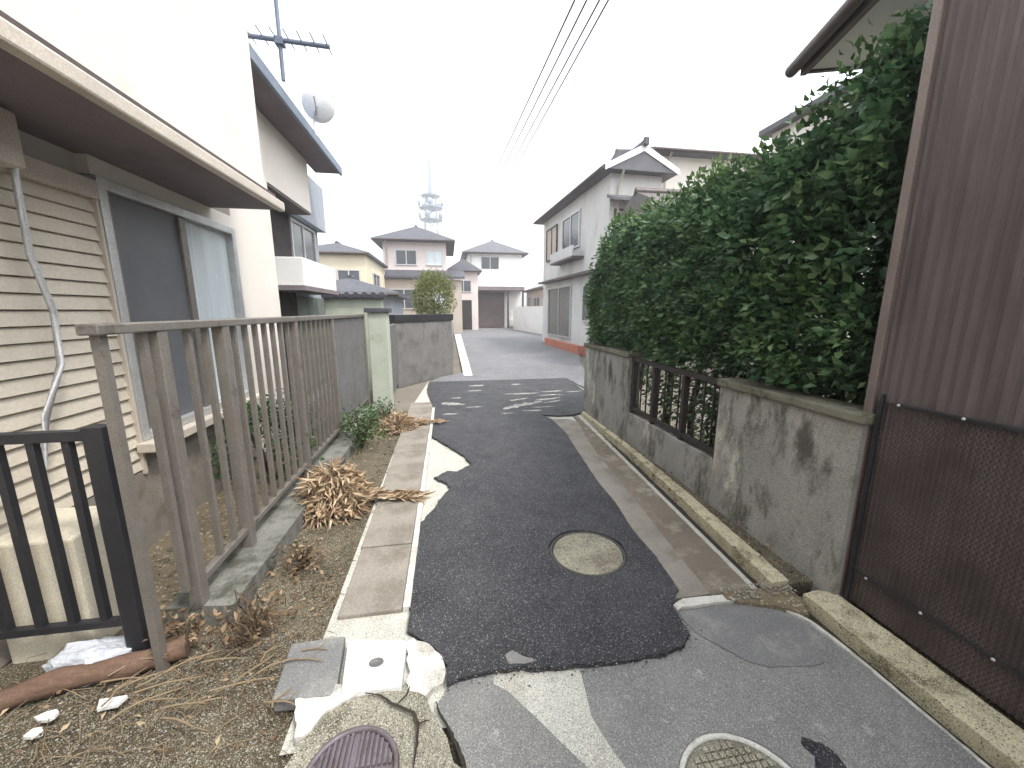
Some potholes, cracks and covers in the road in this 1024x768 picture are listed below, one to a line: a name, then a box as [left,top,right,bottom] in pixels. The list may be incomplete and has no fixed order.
manhole cover [679,733,791,768]
manhole cover [306,725,399,768]
crack [366,686,466,768]
manhole cover [549,531,627,577]
